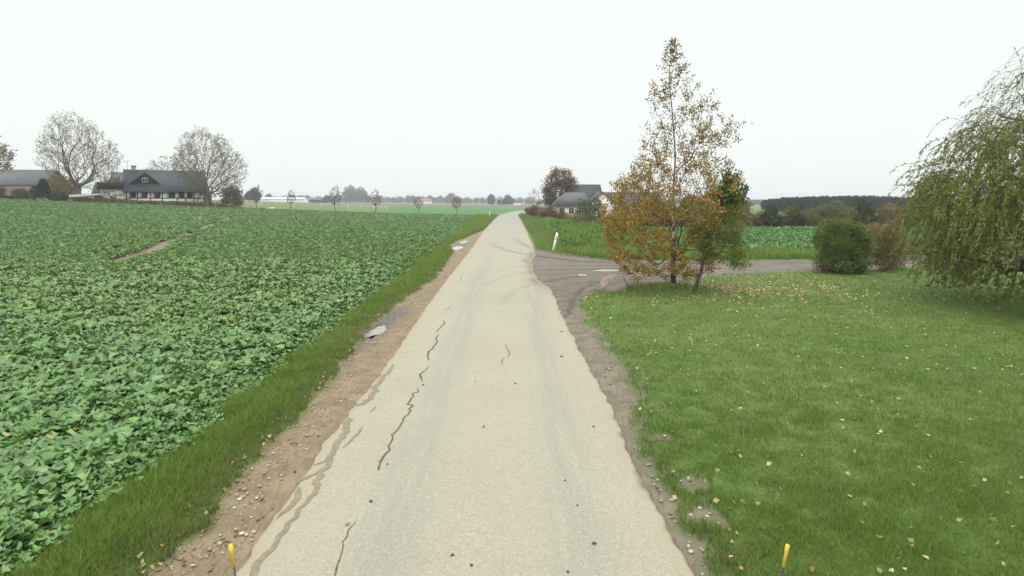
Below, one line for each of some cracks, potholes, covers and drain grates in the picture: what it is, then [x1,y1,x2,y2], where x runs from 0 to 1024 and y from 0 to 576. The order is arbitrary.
crack [342,305,452,471]
crack [334,521,356,576]
